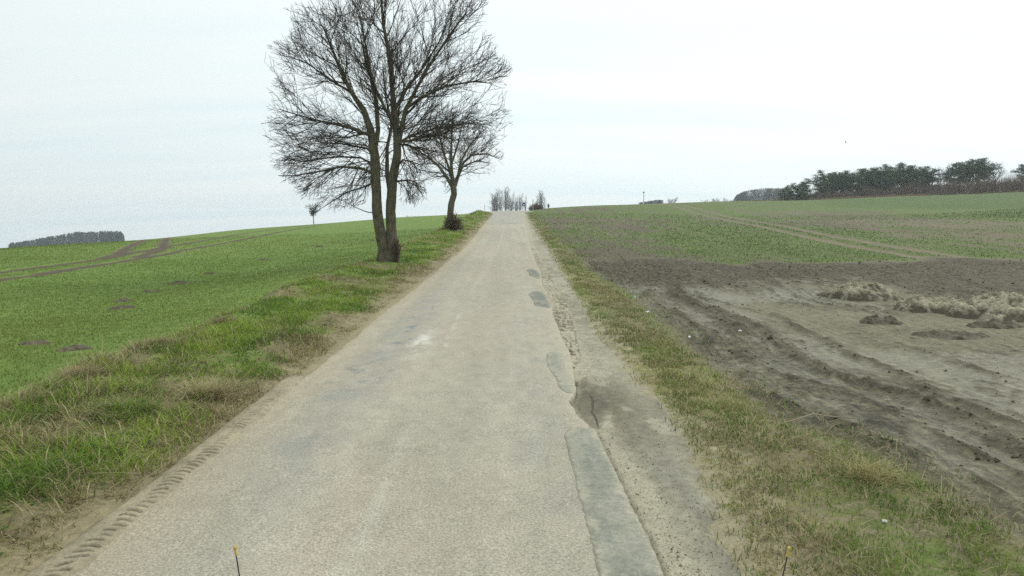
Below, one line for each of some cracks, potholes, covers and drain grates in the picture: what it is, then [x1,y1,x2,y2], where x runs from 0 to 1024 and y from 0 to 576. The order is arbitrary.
pothole [572,377,613,429]
